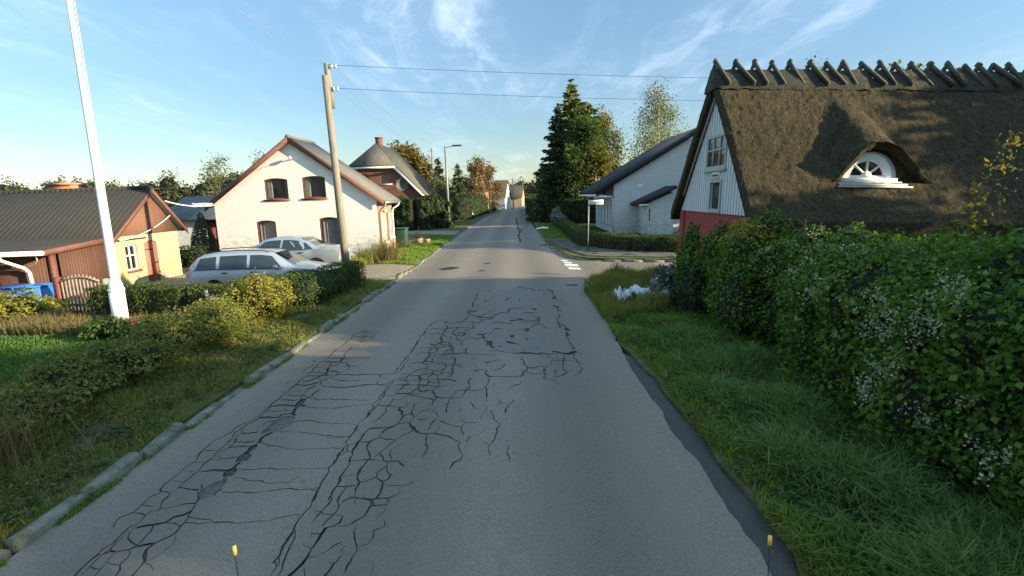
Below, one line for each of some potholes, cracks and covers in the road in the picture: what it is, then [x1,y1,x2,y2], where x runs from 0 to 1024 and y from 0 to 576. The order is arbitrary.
crack [74,286,583,576]
pothole [198,479,227,500]
pothole [260,415,296,435]
